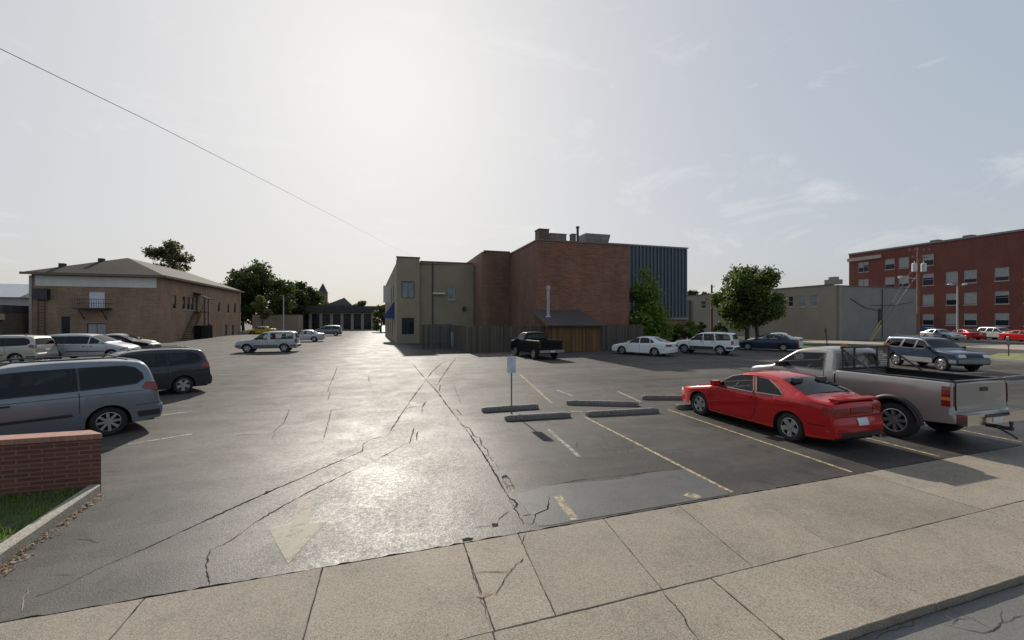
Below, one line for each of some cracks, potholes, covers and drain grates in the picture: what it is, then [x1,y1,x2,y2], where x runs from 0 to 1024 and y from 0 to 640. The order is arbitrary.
crack [866,608,1024,640]
crack [37,358,553,596]
